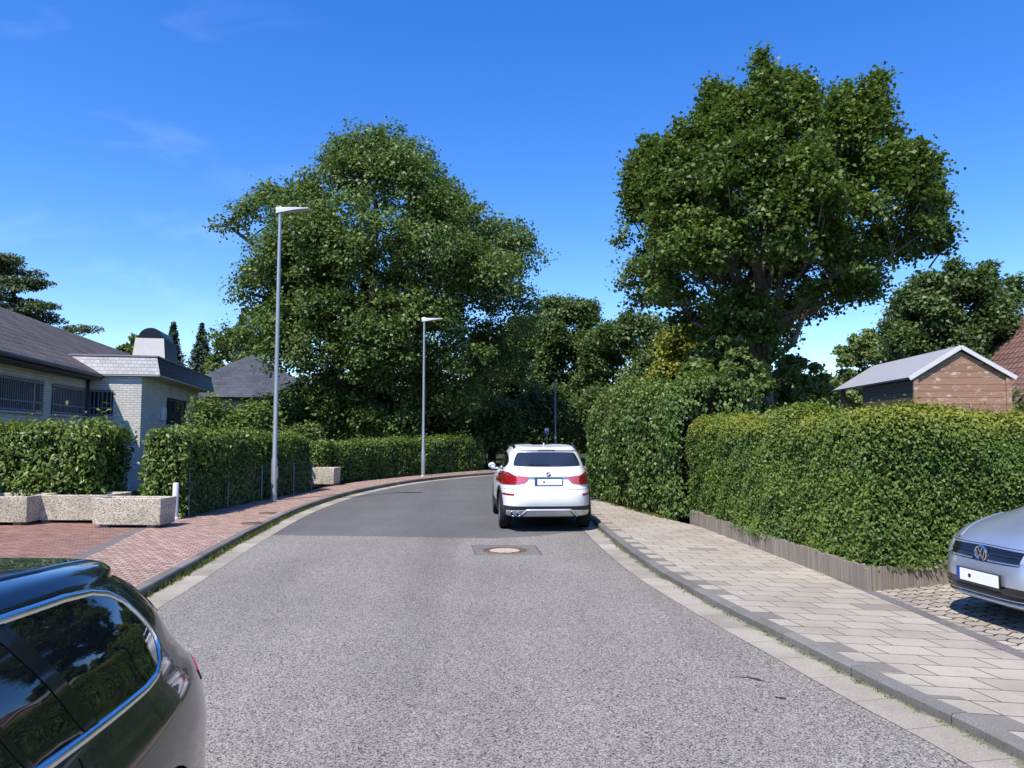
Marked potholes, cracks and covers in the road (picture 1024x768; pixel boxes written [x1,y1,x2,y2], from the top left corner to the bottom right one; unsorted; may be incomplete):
crack [735,676,786,700]
